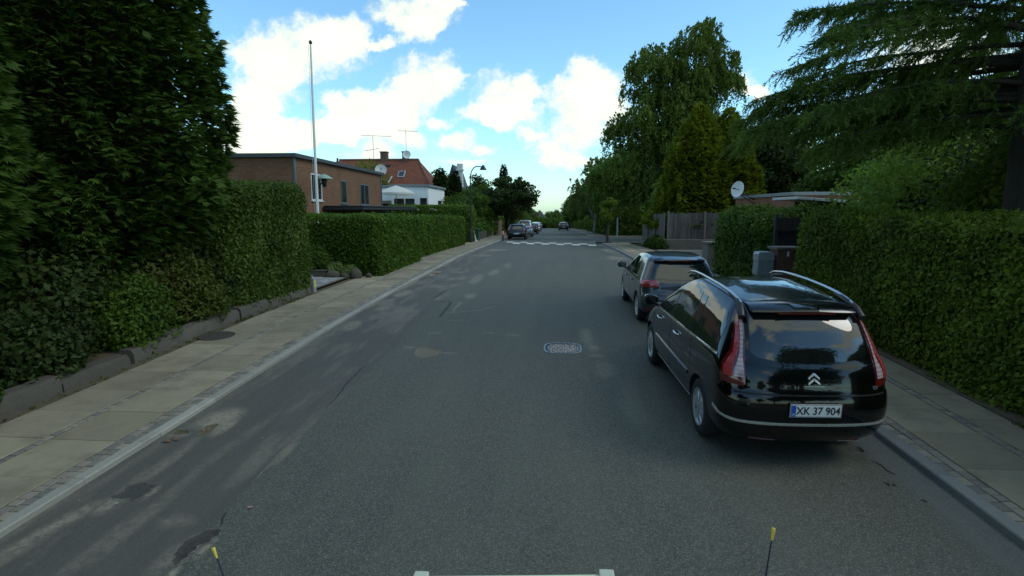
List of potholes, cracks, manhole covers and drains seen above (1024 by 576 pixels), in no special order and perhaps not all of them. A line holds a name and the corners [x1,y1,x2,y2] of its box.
crack [433,290,496,321]
pothole [111,482,157,501]
pothole [172,529,221,567]
manhole cover [544,343,582,354]
